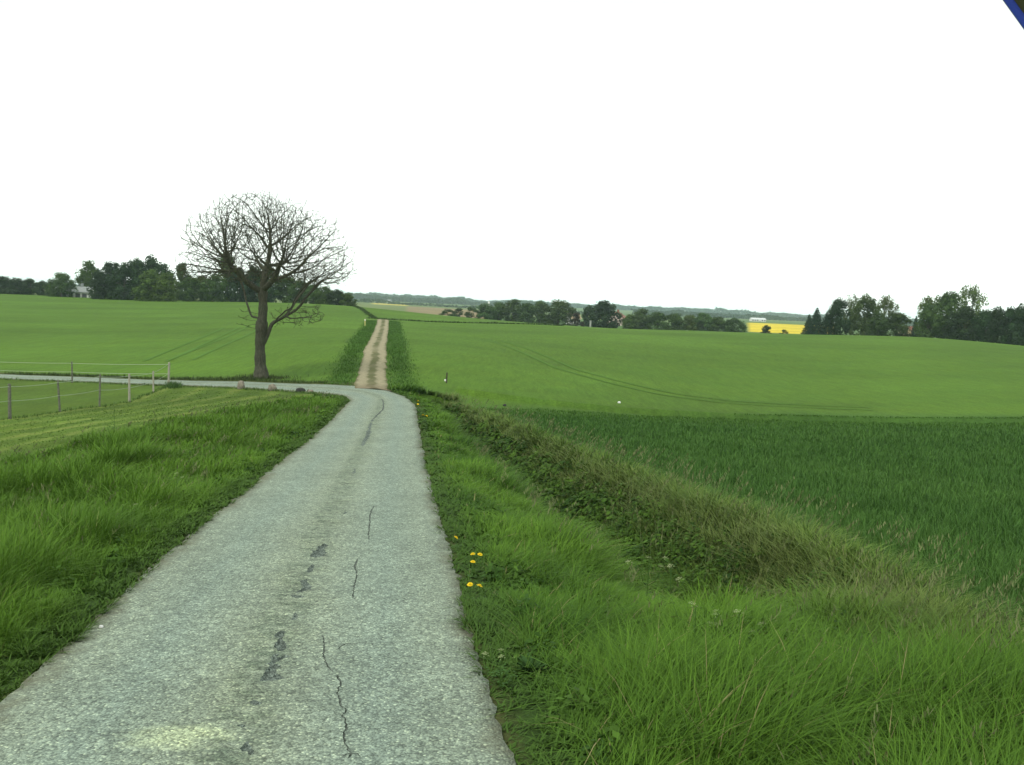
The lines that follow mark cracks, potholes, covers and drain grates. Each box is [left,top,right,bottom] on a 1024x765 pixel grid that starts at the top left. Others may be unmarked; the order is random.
pothole [310,543,329,558]
pothole [260,654,290,681]
crack [322,635,361,758]
pothole [296,579,312,593]
pothole [274,631,287,651]
